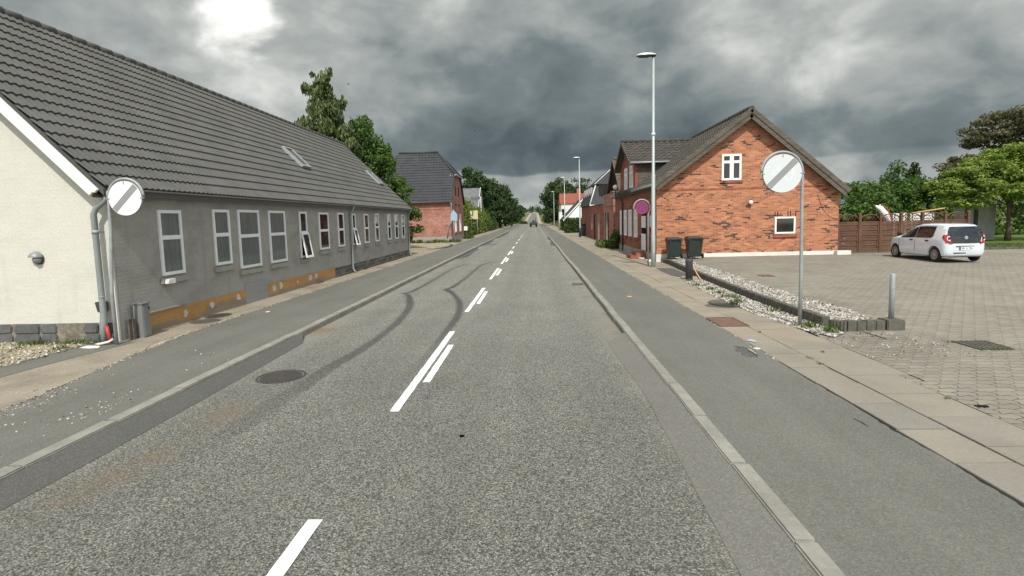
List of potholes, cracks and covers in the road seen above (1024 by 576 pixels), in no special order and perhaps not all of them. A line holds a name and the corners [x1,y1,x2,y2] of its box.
manhole cover [255,369,307,384]
manhole cover [705,317,750,327]
drain grate [951,340,1015,350]
